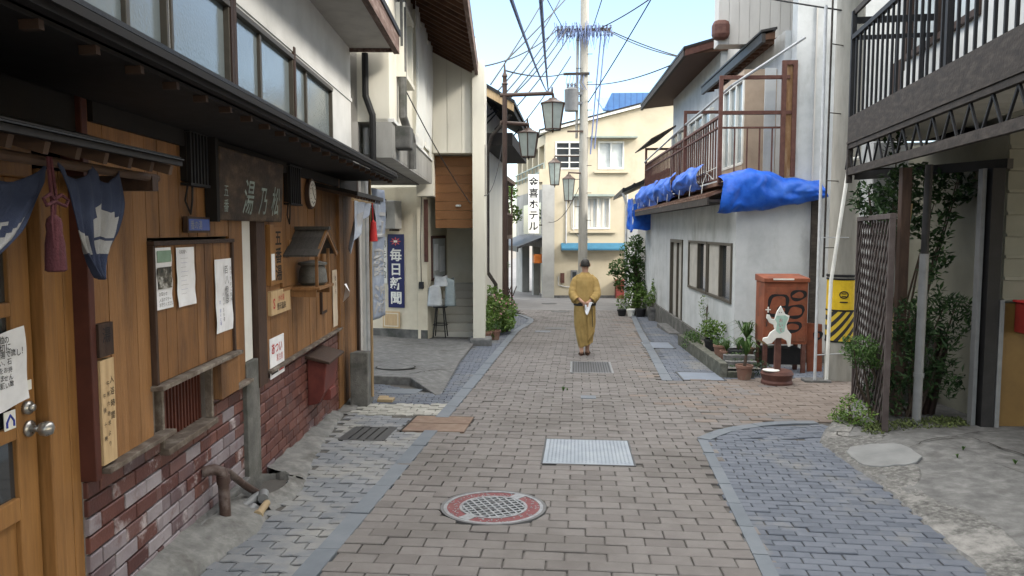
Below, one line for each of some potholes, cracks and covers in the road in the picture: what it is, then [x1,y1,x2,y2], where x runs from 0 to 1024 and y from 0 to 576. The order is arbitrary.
drain grate [570,361,614,374]
manhole cover [441,490,546,526]
manhole cover [675,371,727,381]
drain grate [338,426,397,442]
